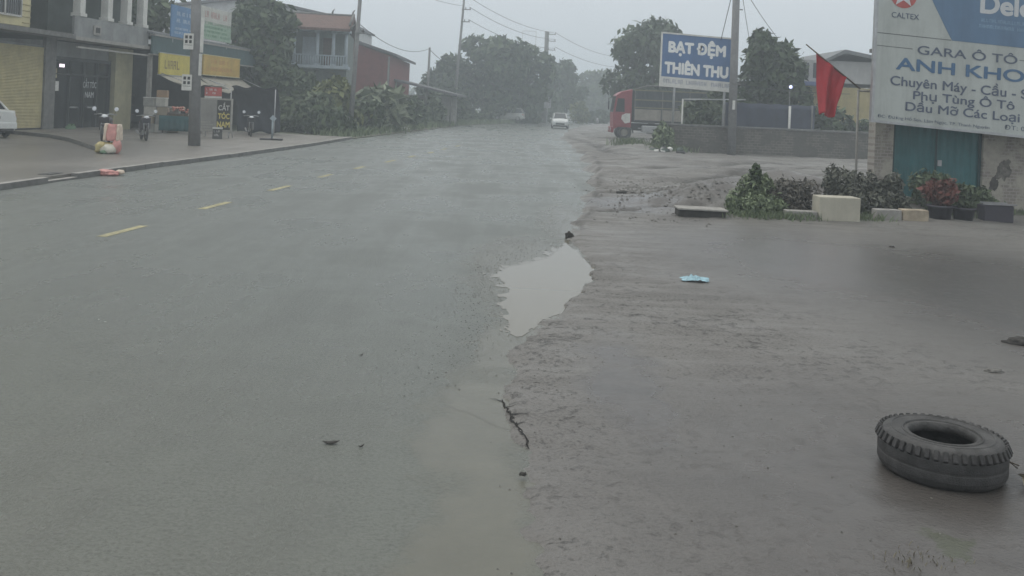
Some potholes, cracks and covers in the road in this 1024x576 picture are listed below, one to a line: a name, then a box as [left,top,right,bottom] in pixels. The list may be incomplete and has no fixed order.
crack [449,398,529,449]
